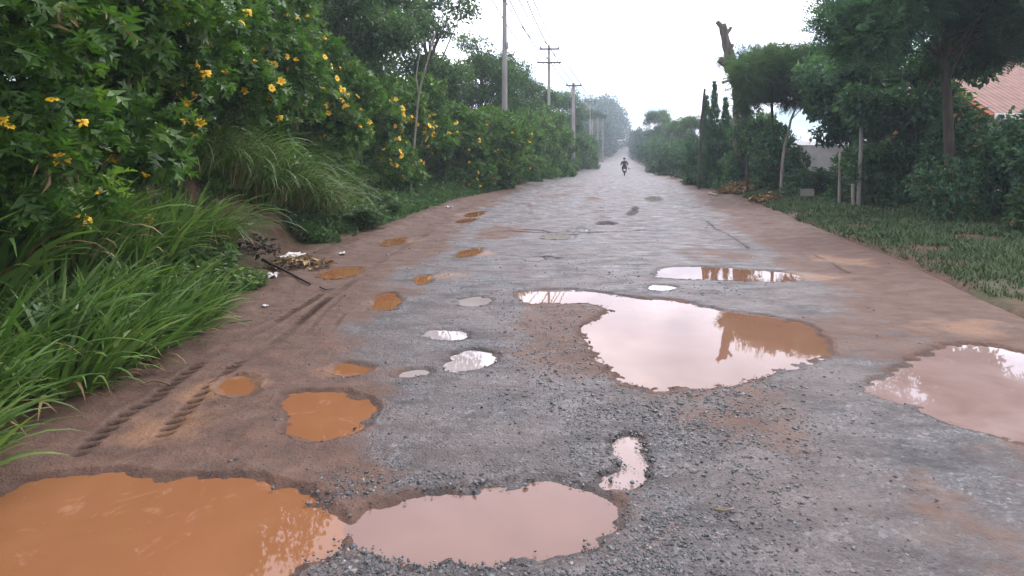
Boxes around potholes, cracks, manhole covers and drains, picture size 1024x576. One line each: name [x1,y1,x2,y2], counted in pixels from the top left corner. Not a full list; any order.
pothole [364,291,408,312]
pothole [268,386,386,443]
pothole [849,340,1024,446]
pothole [432,346,507,374]
pothole [451,294,496,307]
pothole [207,371,268,398]
pothole [321,358,379,377]
pothole [415,326,479,342]
pothole [0,463,363,576]
pothole [577,428,665,498]
pothole [335,469,640,576]
pothole [509,287,841,394]
